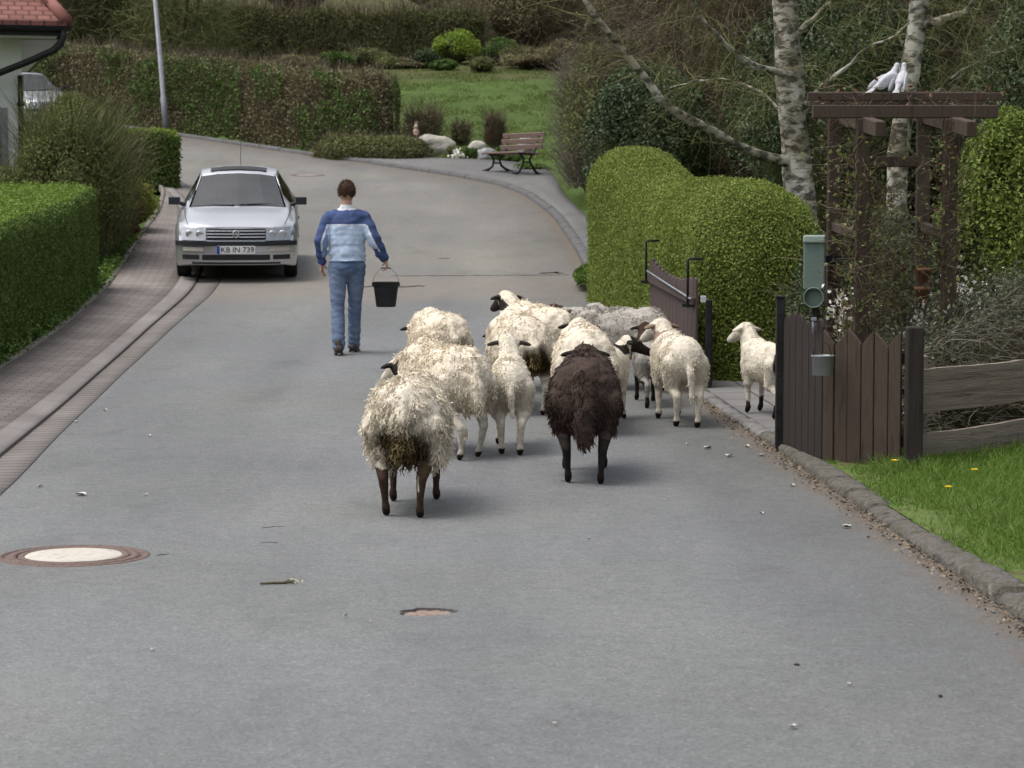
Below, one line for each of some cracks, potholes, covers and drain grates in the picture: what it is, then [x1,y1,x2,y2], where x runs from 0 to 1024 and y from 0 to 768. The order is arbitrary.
manhole cover [0,545,150,567]
